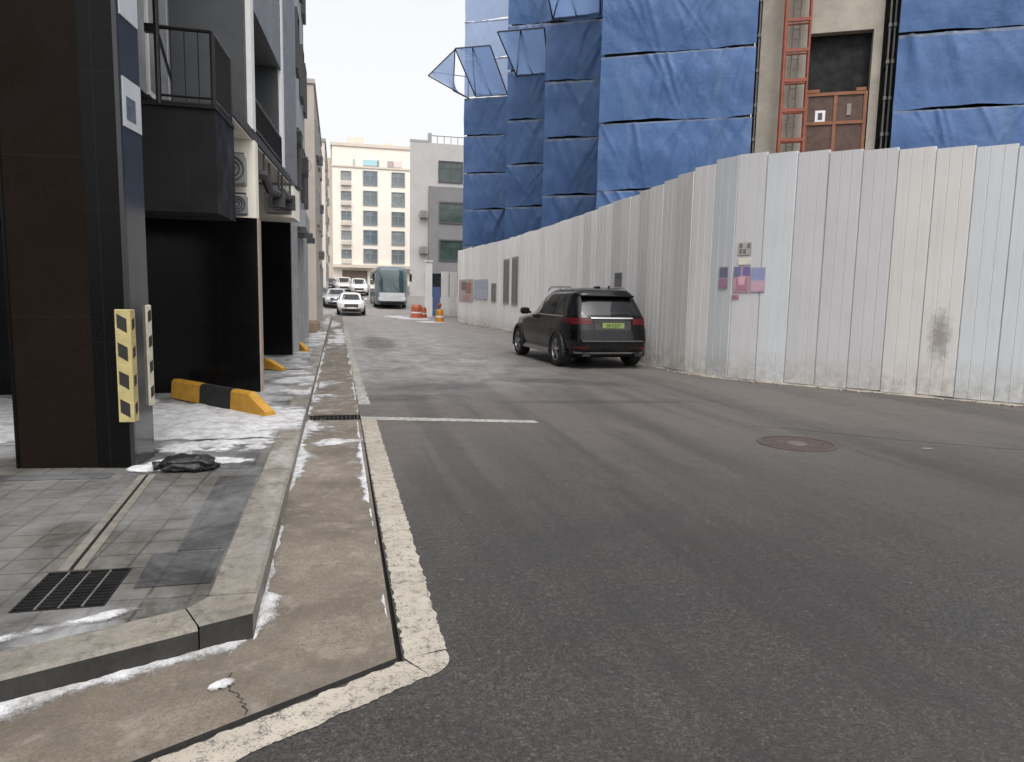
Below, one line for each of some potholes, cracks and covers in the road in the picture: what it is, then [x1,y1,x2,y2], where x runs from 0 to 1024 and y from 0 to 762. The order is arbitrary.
manhole cover [756,435,839,452]
drain grate [8,568,132,613]
crack [226,673,248,715]
